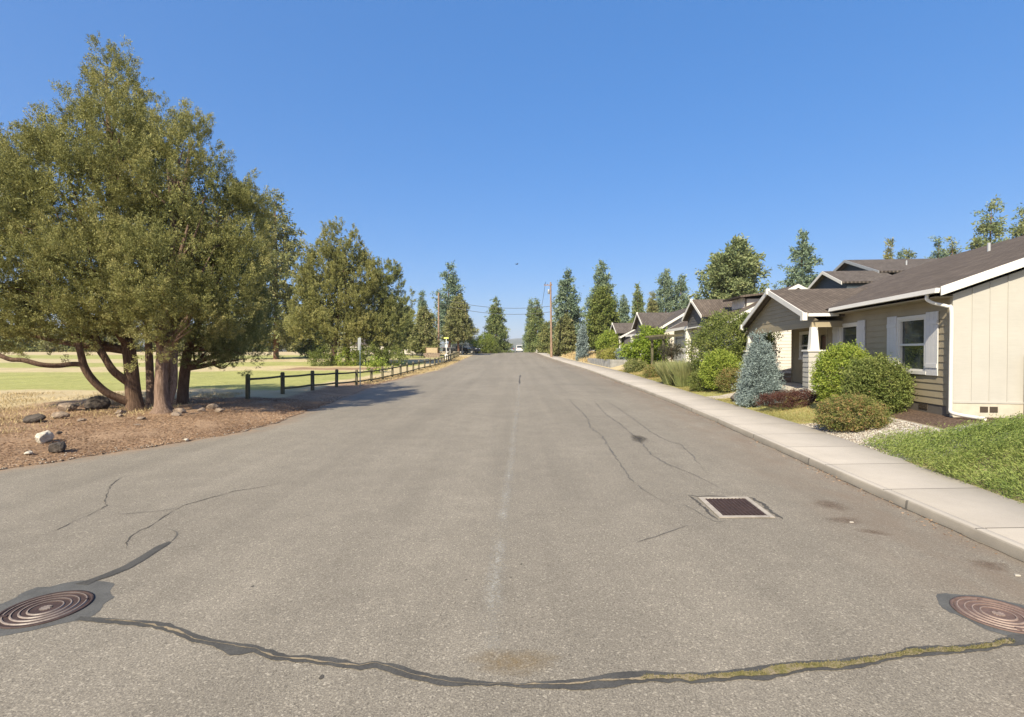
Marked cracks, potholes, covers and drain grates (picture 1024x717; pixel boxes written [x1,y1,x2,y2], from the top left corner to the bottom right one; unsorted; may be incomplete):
drain grate [698,497,775,518]
manhole cover [950,596,1024,634]
crack [125,481,288,545]
manhole cover [0,590,94,629]
crack [559,367,732,542]
